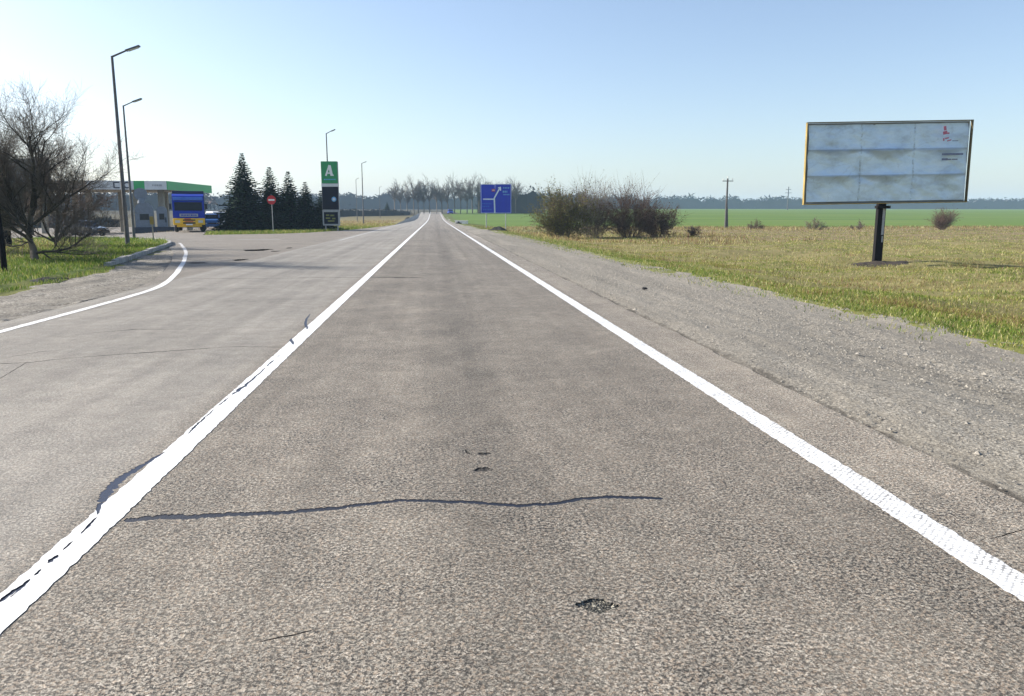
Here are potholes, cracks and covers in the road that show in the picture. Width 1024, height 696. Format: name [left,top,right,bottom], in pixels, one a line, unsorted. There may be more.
crack [0,453,663,602]
crack [257,629,315,643]
pothole [575,598,620,614]
